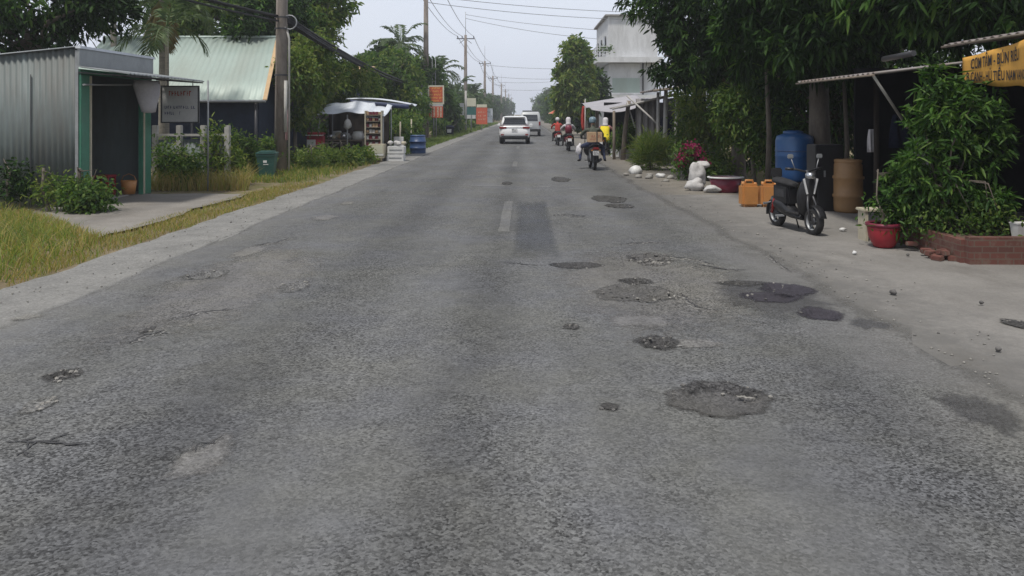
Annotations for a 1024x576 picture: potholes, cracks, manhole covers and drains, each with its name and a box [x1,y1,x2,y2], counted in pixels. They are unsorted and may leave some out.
pothole [626,253,674,266]
crack [128,307,240,344]
crack [6,433,93,457]
pothole [278,281,311,292]
pothole [182,270,229,280]
pothole [665,380,773,418]
pothole [599,402,619,411]
pothole [42,367,81,383]
pothole [634,334,682,350]
pothole [588,283,682,303]
